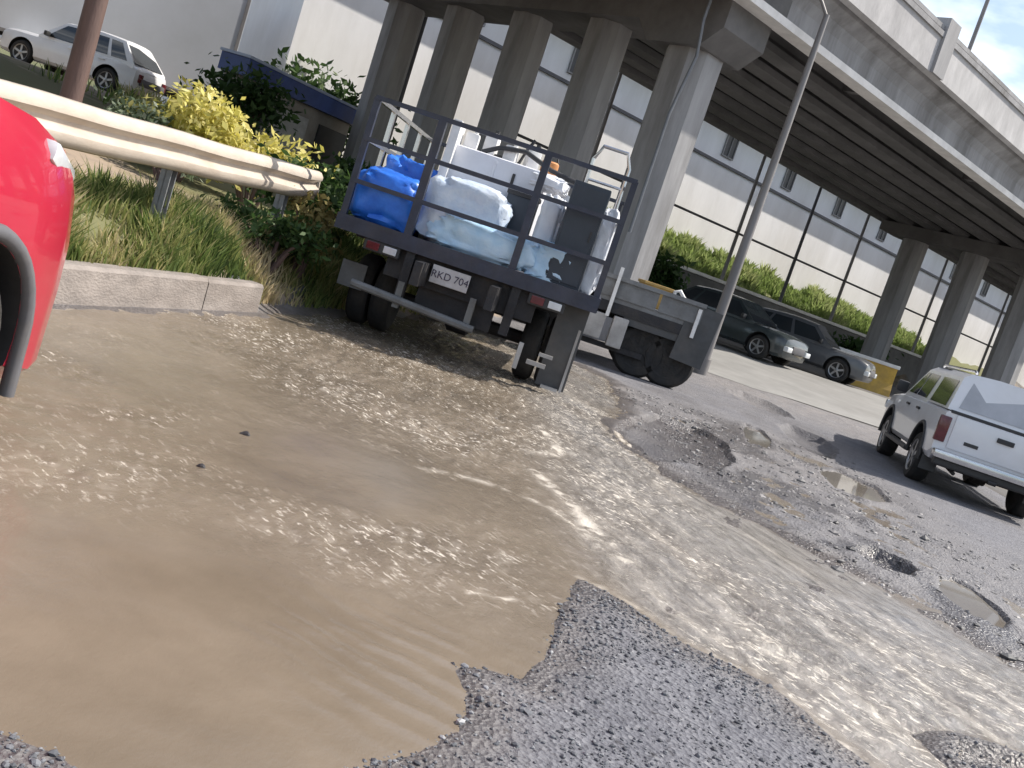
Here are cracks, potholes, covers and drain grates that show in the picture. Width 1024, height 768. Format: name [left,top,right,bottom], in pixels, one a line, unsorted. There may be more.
pothole [778,423,840,459]
pothole [615,414,736,471]
pothole [726,389,795,419]
pothole [936,575,1013,628]
pothole [742,423,773,448]
pothole [956,738,1024,768]
pothole [821,469,892,502]
pothole [0,579,580,768]
pothole [855,543,921,576]
